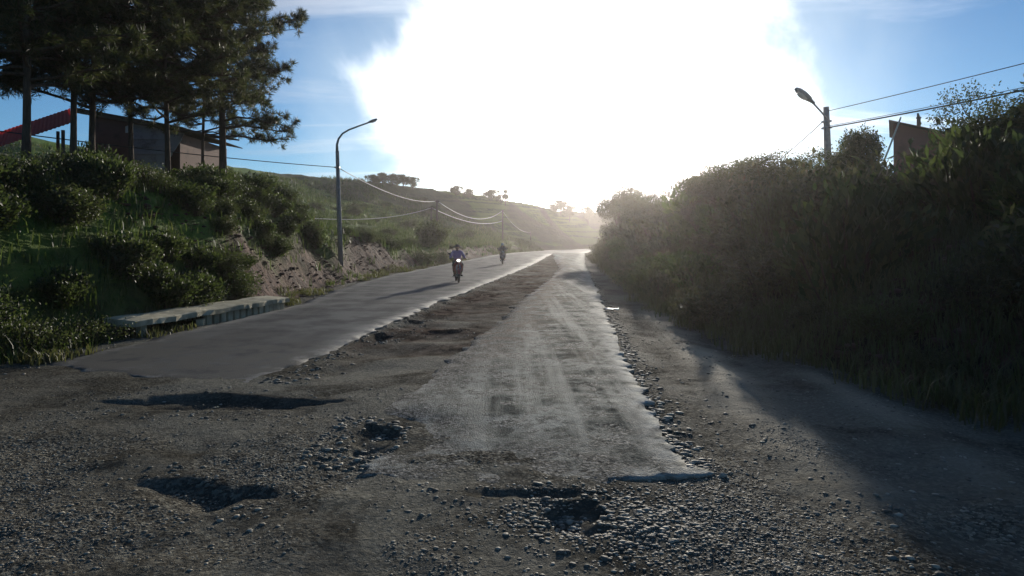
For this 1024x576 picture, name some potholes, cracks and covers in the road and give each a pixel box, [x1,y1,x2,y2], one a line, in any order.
pothole [120,474,290,517]
pothole [364,333,394,343]
pothole [442,487,613,500]
pothole [89,392,359,412]
pothole [345,424,403,459]
pothole [540,497,616,538]
